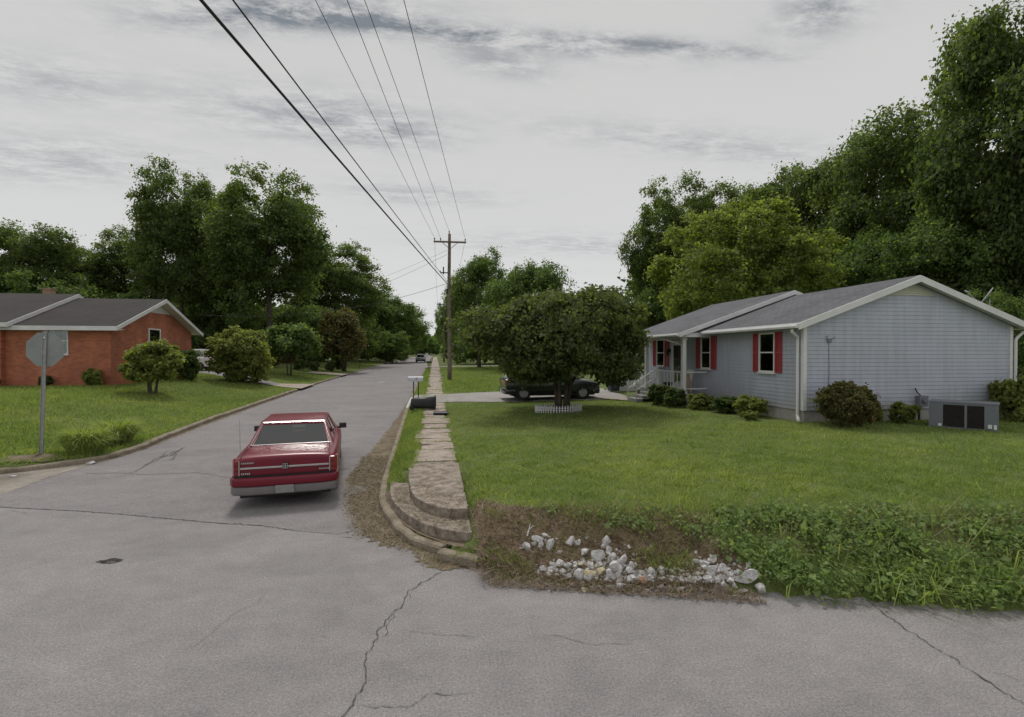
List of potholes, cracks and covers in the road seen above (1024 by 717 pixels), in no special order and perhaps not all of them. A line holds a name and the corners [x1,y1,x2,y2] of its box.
crack [341,570,467,717]
crack [83,447,230,478]
crack [872,604,1022,702]
crack [12,493,294,531]
